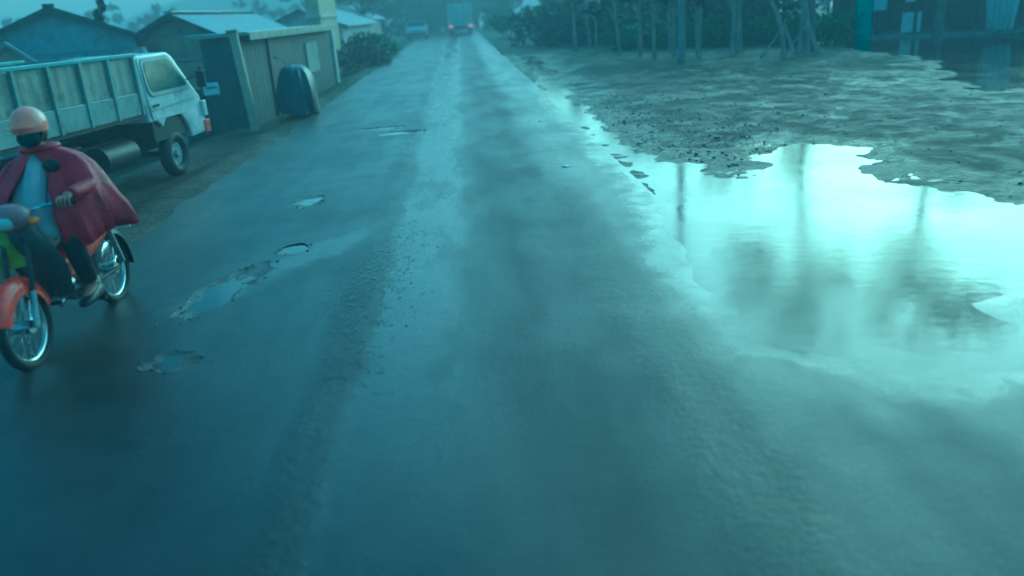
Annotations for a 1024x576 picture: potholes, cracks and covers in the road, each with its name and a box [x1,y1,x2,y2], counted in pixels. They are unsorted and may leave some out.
pothole [154,254,281,326]
pothole [274,241,311,255]
pothole [136,349,212,374]
pothole [287,195,326,209]
